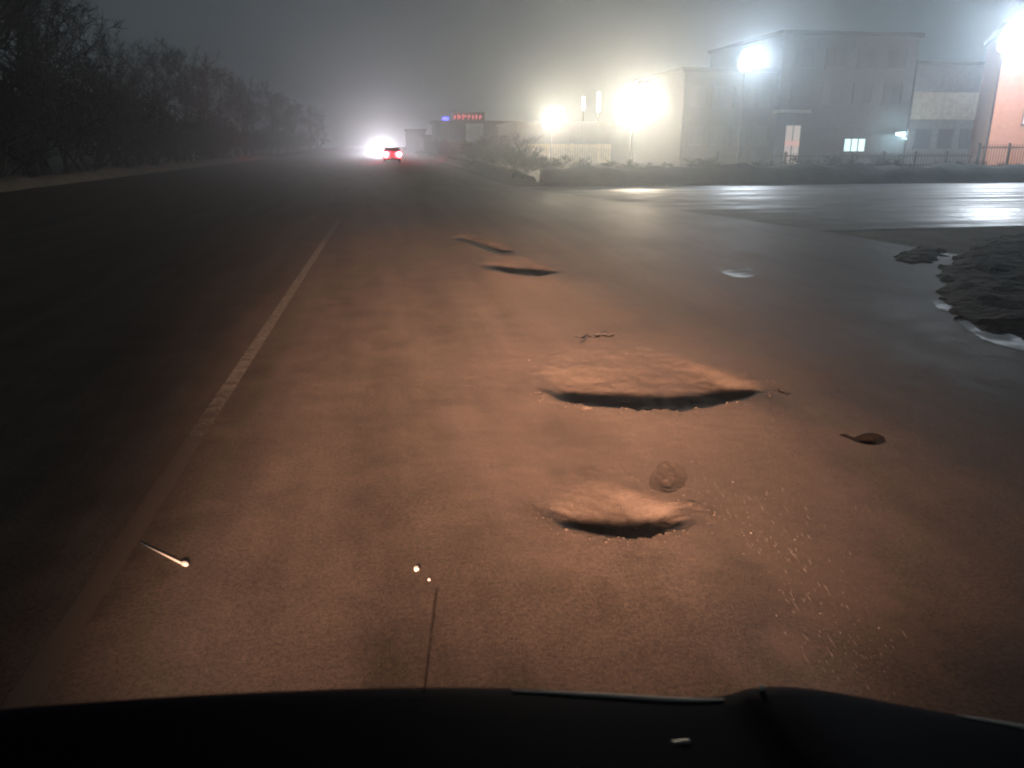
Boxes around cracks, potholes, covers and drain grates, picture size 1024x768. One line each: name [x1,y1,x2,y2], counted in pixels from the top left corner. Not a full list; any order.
pothole [839,433,886,445]
pothole [525,341,774,412]
pothole [474,252,565,276]
pothole [446,231,522,255]
pothole [533,469,714,541]
crack [574,331,621,344]
